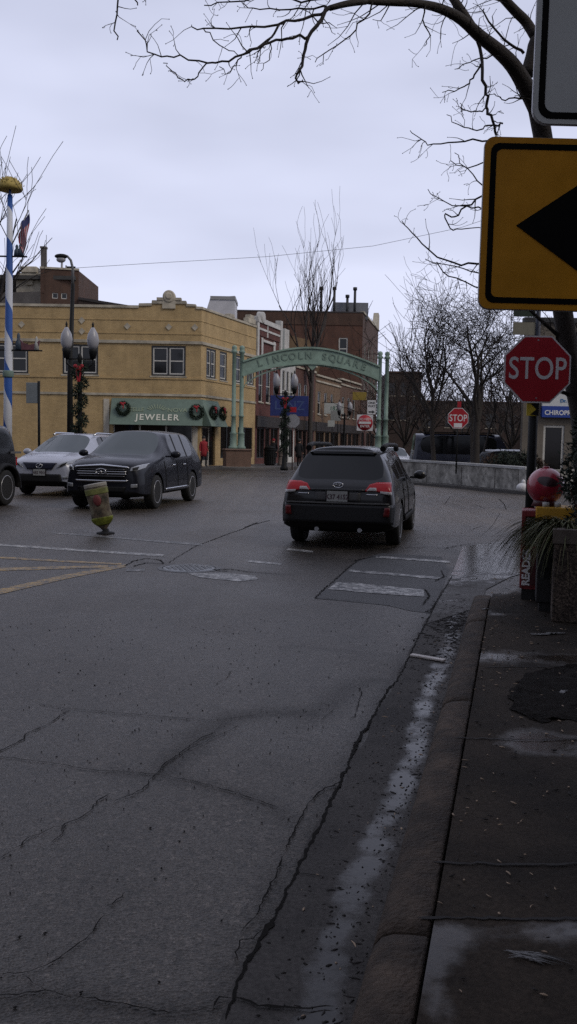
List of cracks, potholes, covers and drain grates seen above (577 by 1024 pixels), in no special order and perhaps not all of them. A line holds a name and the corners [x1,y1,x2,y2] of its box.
manhole cover [157,564,220,573]
crack [125,520,270,566]
crack [0,570,453,1019]
